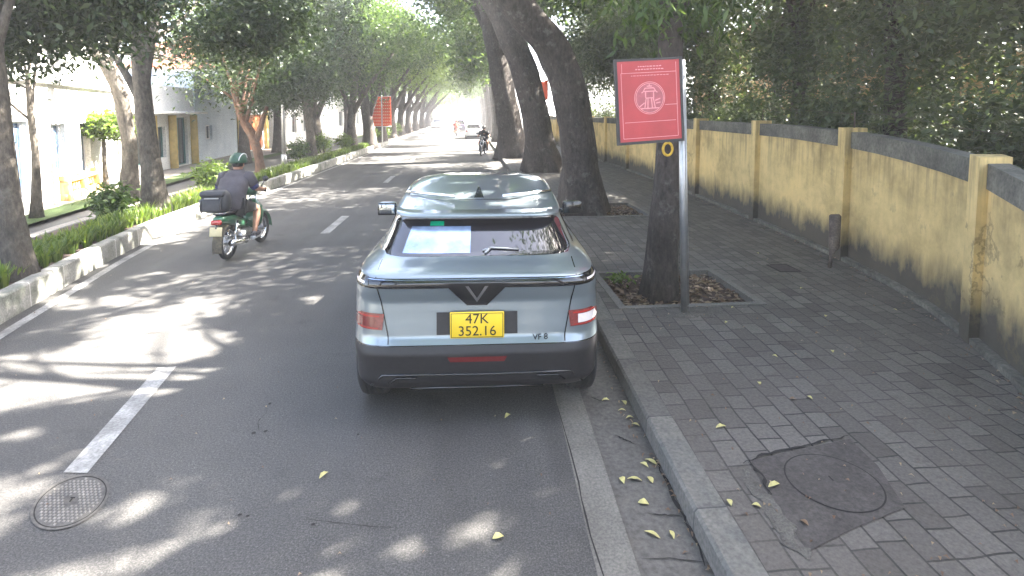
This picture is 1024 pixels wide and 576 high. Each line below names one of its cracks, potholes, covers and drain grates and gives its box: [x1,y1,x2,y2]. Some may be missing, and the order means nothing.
utility cover [767,264,802,272]
utility cover [750,439,905,550]
manhole cover [30,474,110,530]
